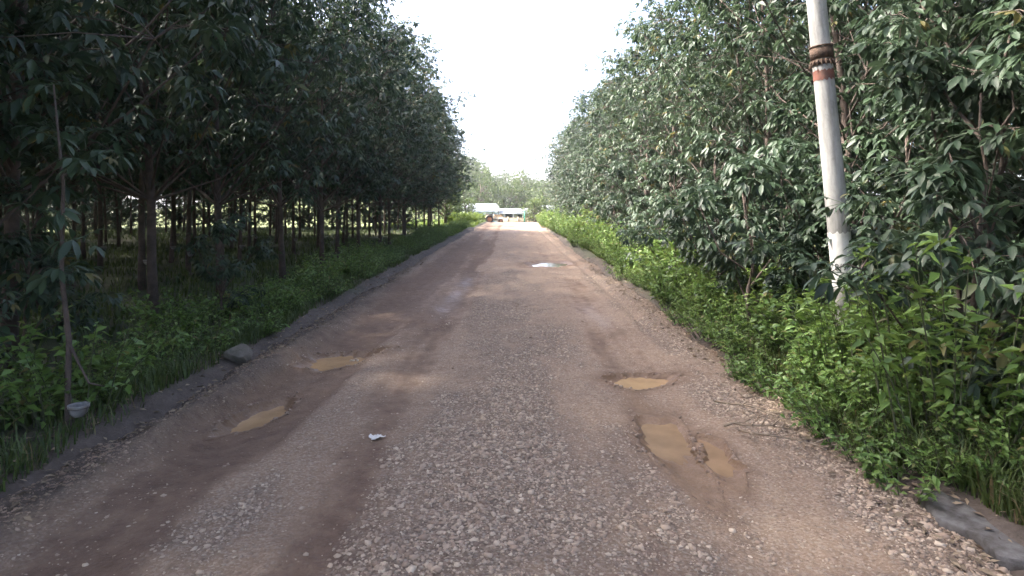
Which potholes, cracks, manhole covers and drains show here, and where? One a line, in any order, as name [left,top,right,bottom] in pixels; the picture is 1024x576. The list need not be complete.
pothole [202,391,303,442]
pothole [523,260,580,268]
pothole [687,431,753,494]
pothole [595,371,686,392]
pothole [628,409,728,512]
pothole [289,345,400,374]
